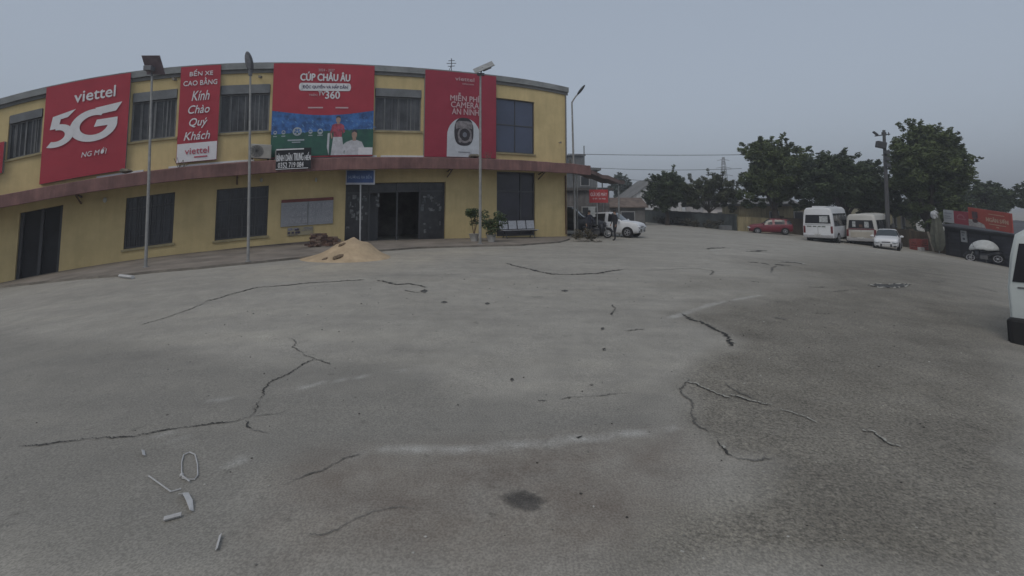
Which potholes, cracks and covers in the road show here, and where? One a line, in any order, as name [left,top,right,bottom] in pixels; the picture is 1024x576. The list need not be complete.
crack [682,314,736,347]
crack [862,429,900,447]
crack [507,263,619,275]
crack [310,506,415,535]
crack [679,379,816,461]
crack [21,338,330,446]
crack [208,279,425,301]
